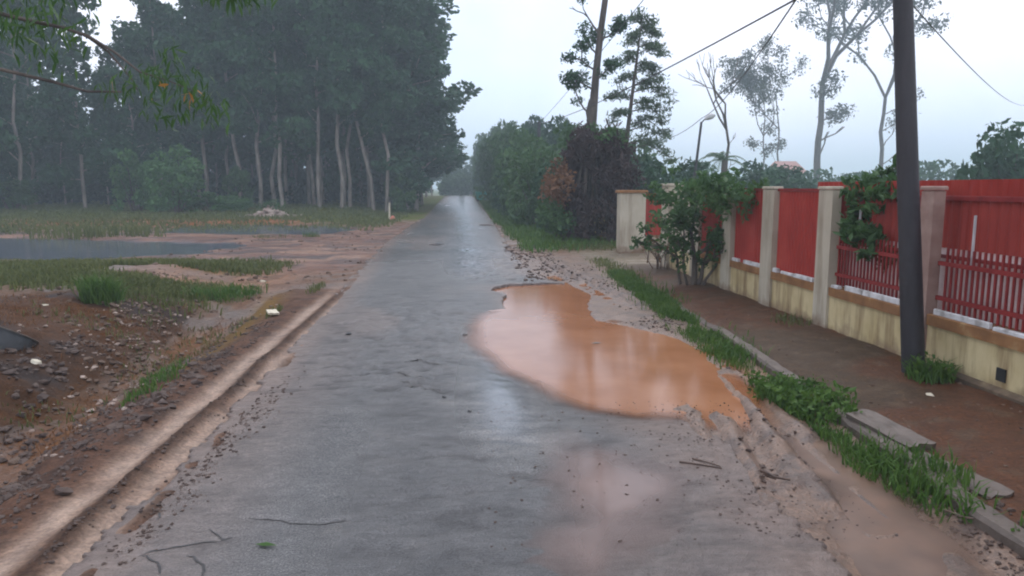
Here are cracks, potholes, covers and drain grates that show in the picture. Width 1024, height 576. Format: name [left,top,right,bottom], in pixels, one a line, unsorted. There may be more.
pothole [471,282,763,428]
crack [349,359,445,394]
crack [142,528,232,576]
